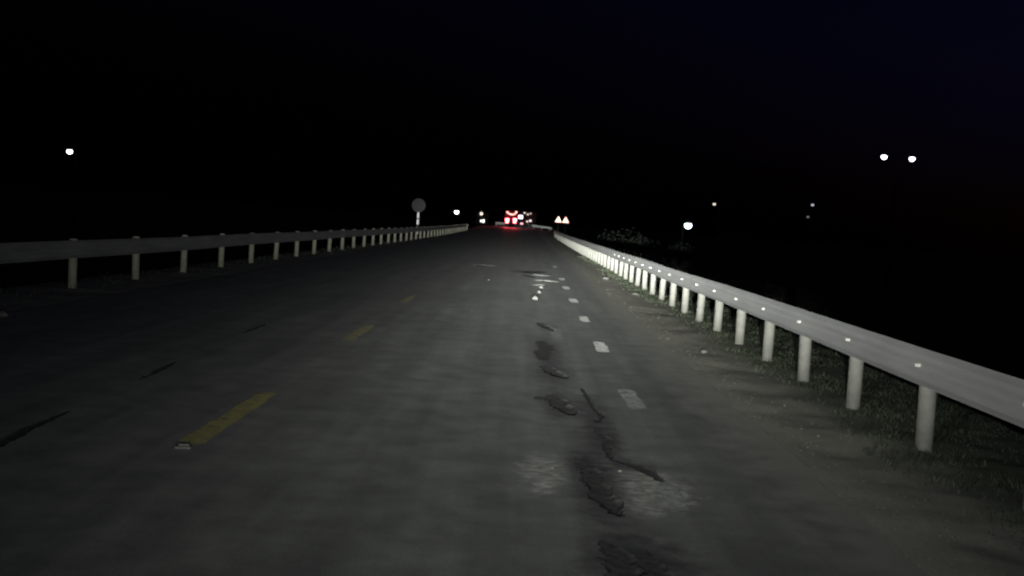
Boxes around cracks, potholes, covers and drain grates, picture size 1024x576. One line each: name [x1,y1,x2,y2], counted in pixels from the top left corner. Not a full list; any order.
crack [580,388,664,482]
pothole [596,539,648,576]
pothole [534,341,558,360]
pothole [545,394,578,416]
pothole [573,457,626,517]
pothole [538,365,571,378]
